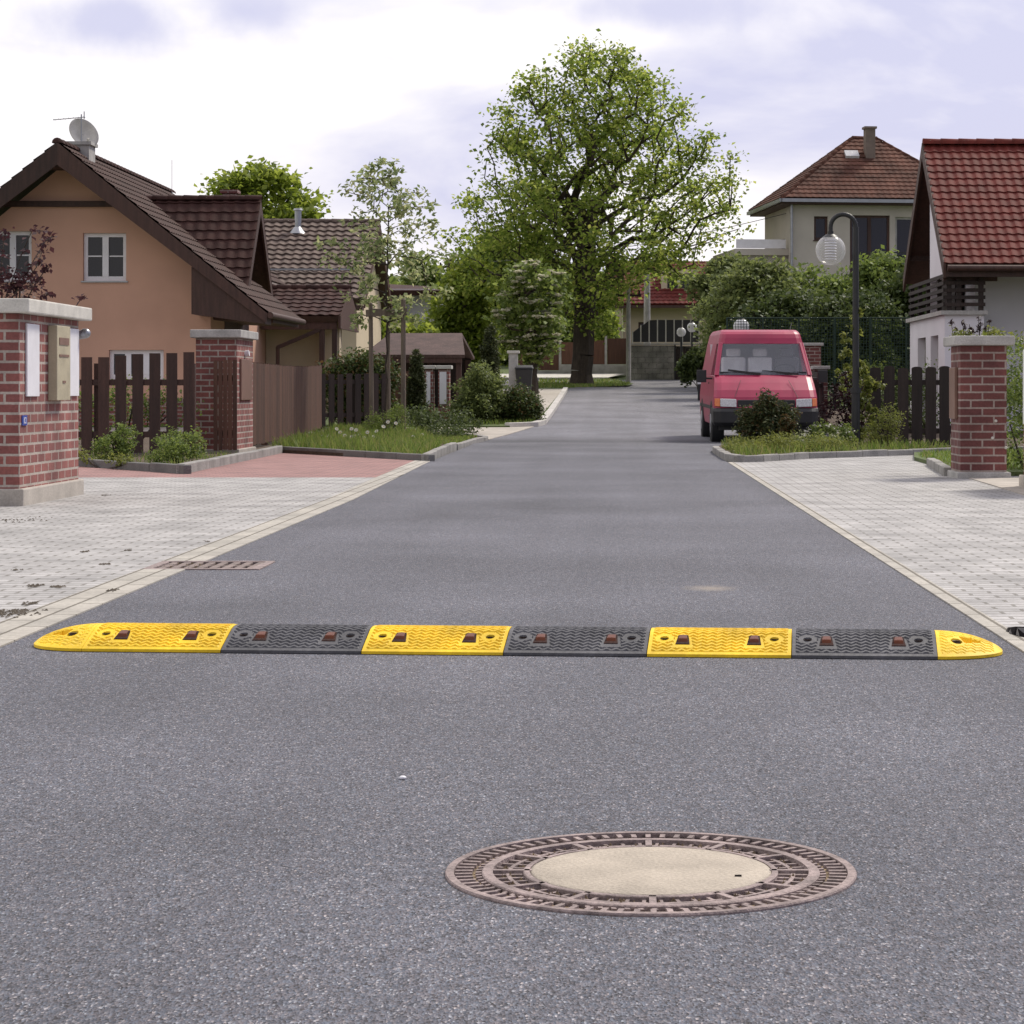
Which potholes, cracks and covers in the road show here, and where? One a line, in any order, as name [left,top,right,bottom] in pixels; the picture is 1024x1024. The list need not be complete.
drain grate [143,561,275,570]
manhole cover [445,831,857,917]
